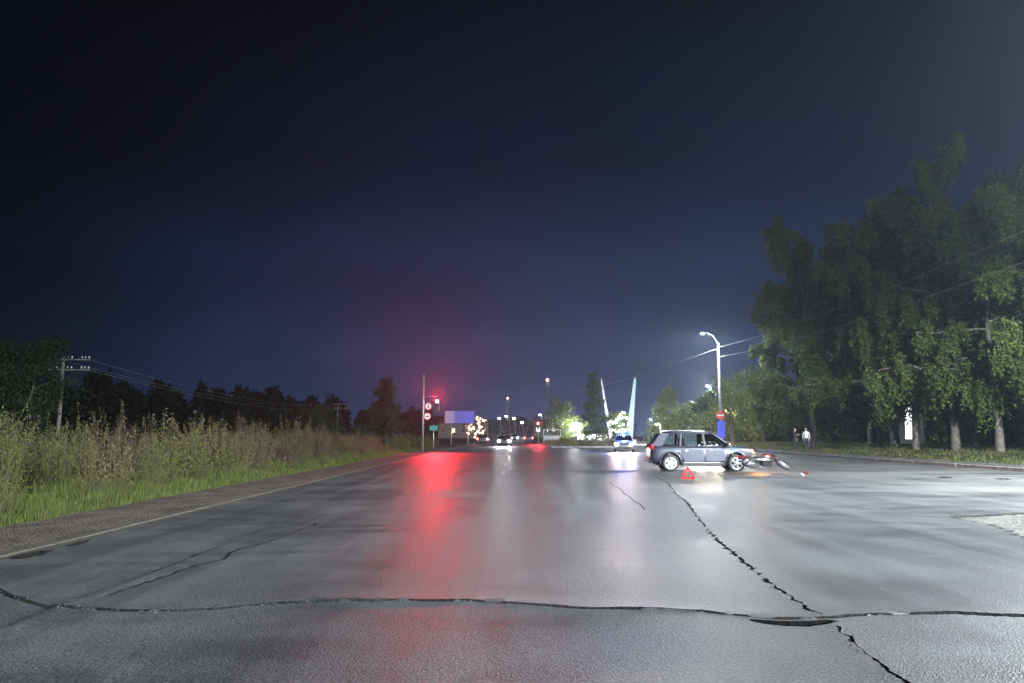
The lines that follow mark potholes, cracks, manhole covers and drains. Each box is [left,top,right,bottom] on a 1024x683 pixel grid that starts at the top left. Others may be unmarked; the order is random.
pothole [9,549,55,559]
crack [531,470,645,509]
crack [0,477,1024,683]
